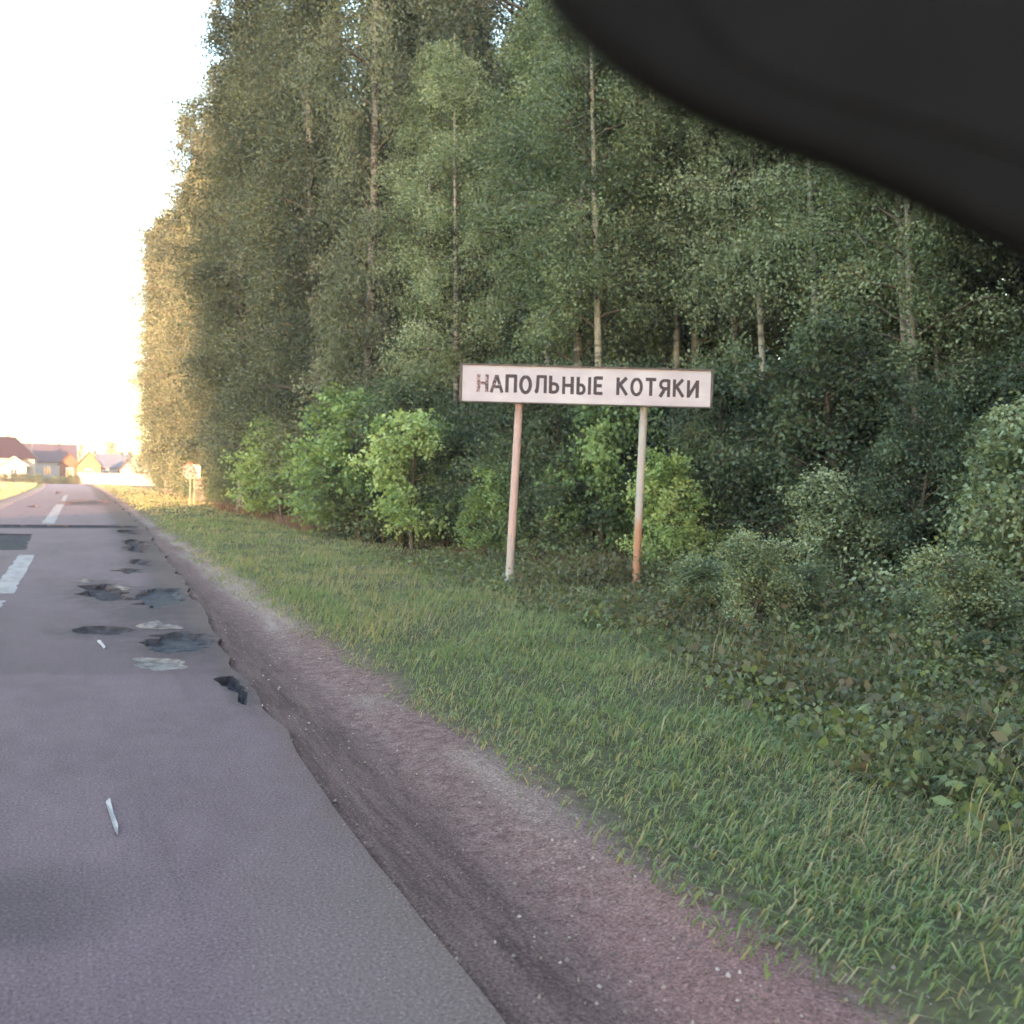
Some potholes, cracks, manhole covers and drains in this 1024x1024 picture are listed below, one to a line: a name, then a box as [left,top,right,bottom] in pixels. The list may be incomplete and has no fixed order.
pothole [120,539,151,553]
pothole [130,588,189,609]
pothole [72,626,137,635]
pothole [214,676,248,705]
pothole [136,620,219,654]
pothole [76,577,136,601]
